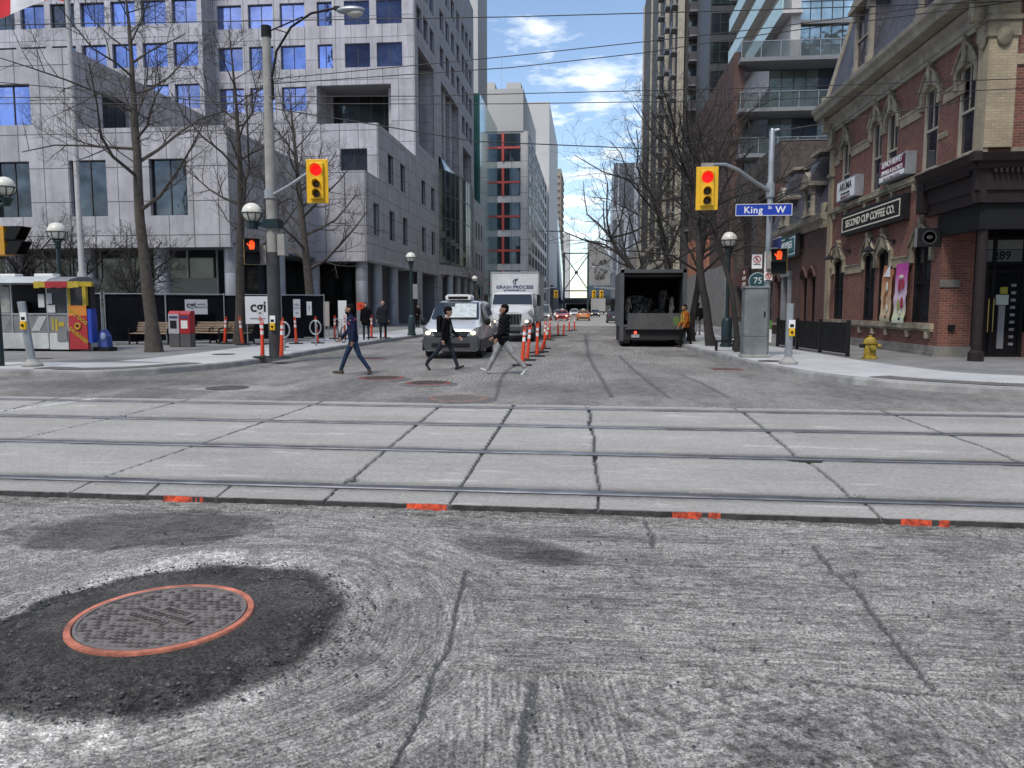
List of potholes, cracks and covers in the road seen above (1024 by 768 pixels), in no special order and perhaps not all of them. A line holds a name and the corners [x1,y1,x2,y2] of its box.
manhole cover [63,584,255,657]
crack [804,546,1021,706]
crack [390,570,468,768]
crack [643,520,655,549]
crack [515,682,539,768]
